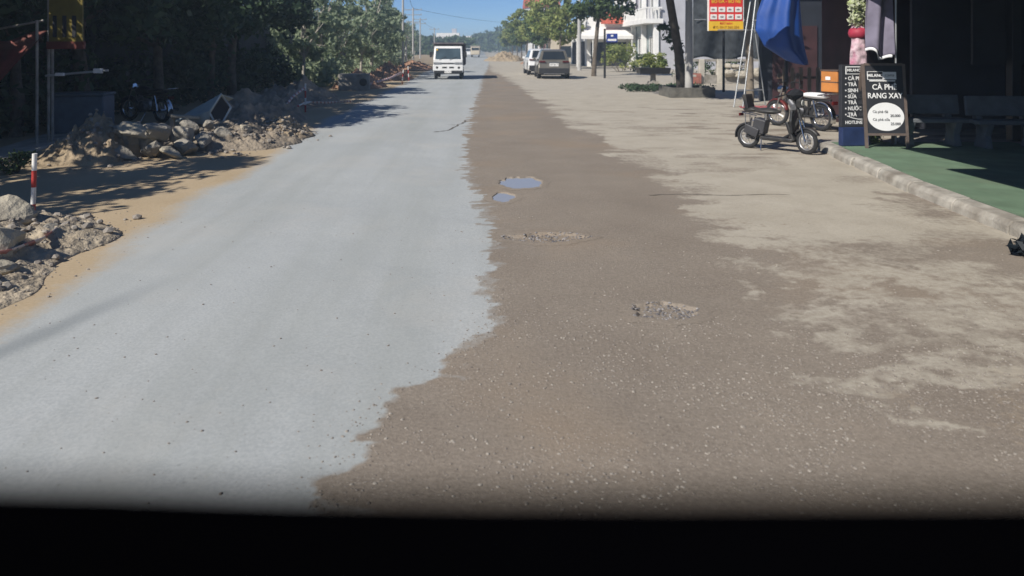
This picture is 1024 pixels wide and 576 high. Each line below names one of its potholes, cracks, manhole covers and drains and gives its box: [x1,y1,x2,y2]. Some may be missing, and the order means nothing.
pothole [487,229,602,246]
pothole [483,190,526,204]
pothole [616,296,718,328]
pothole [492,175,552,190]
